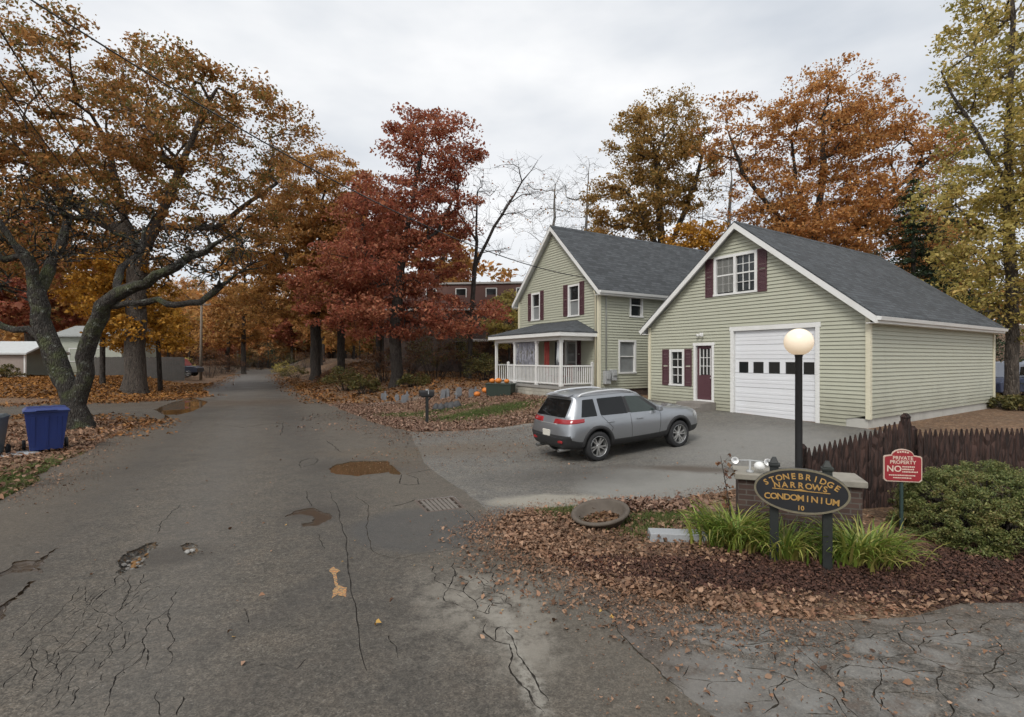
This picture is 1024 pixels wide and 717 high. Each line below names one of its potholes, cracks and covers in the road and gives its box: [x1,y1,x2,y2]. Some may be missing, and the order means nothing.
crack [431,563,549,712]
pothole [181,543,201,557]
pothole [116,542,158,575]
crack [154,691,185,716]
drain grate [414,496,465,513]
crack [3,574,181,715]
